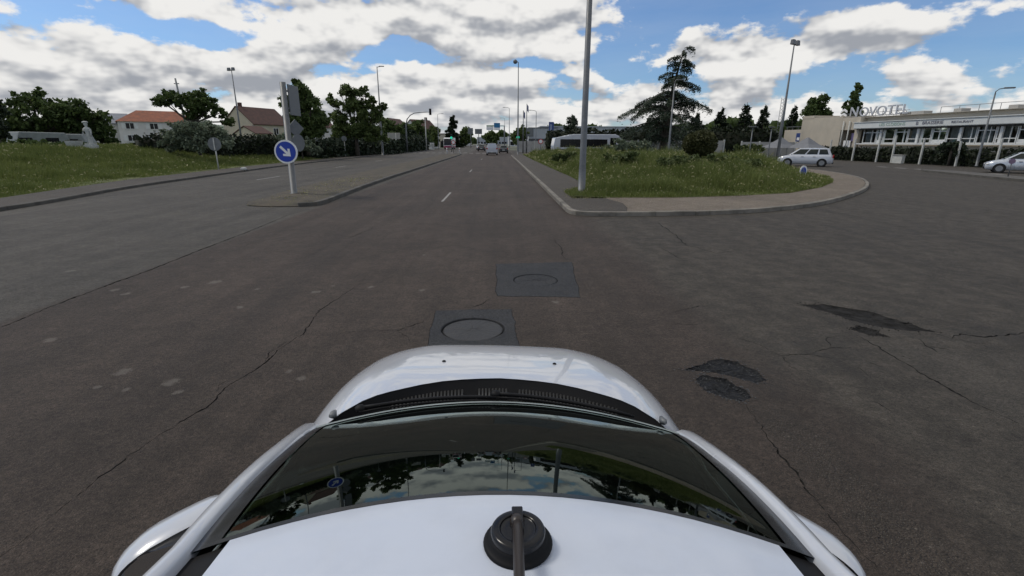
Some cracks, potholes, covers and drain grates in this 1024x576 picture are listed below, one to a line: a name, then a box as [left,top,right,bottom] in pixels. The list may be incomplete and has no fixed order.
manhole cover [441,318,505,341]
crack [921,332,1023,351]
manhole cover [513,274,558,286]
crack [728,336,882,388]
crack [0,270,371,557]
